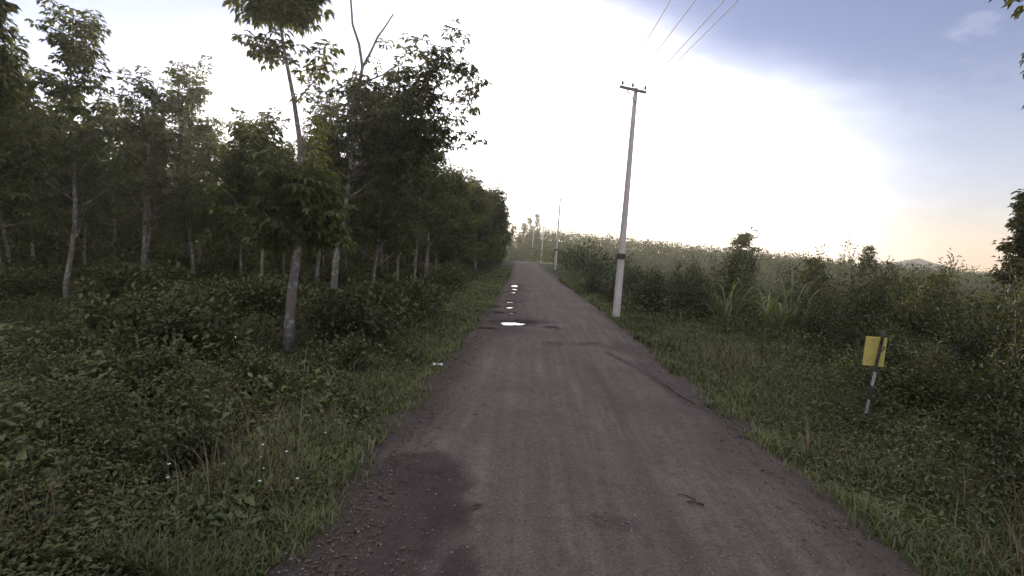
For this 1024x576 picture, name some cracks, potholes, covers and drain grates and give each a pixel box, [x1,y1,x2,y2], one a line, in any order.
crack [605,352,753,440]
pothole [586,513,639,531]
